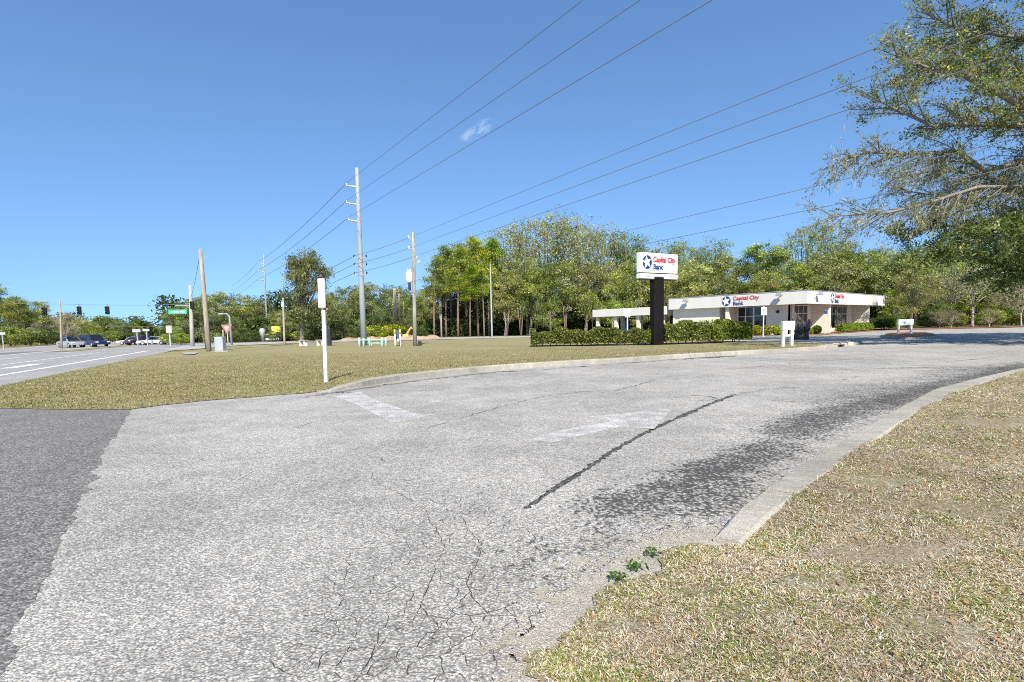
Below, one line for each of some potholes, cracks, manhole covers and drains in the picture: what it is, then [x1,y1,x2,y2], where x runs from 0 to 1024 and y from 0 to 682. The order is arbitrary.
crack [270,472,570,682]
crack [429,380,654,428]
